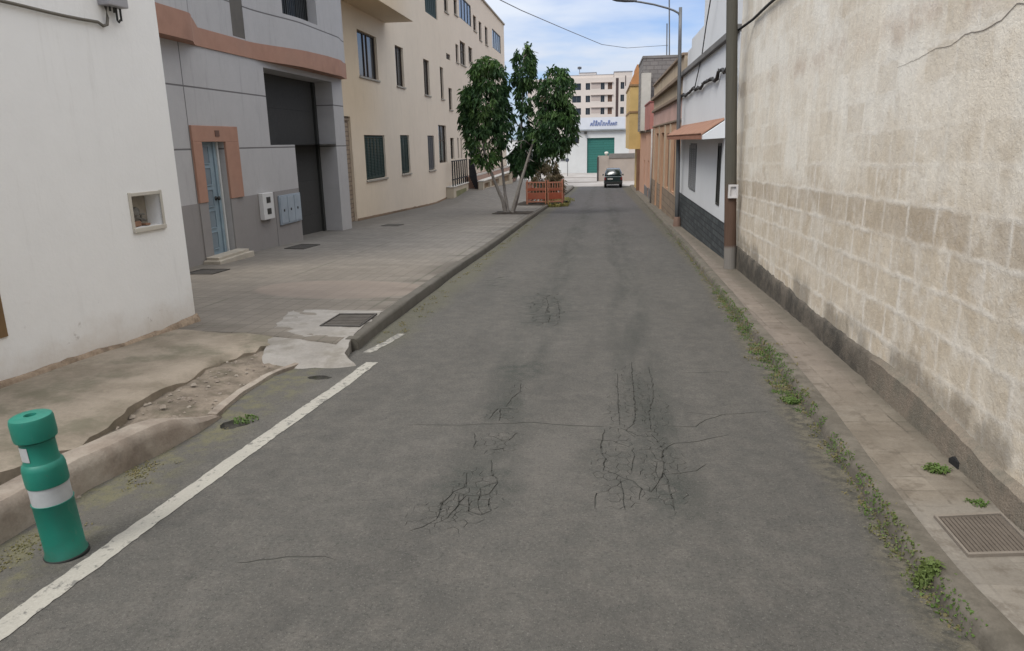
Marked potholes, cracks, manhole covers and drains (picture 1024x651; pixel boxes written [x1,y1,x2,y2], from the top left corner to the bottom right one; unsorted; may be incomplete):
crack [526,278,565,326]
crack [405,364,752,532]
pothole [220,419,249,430]
